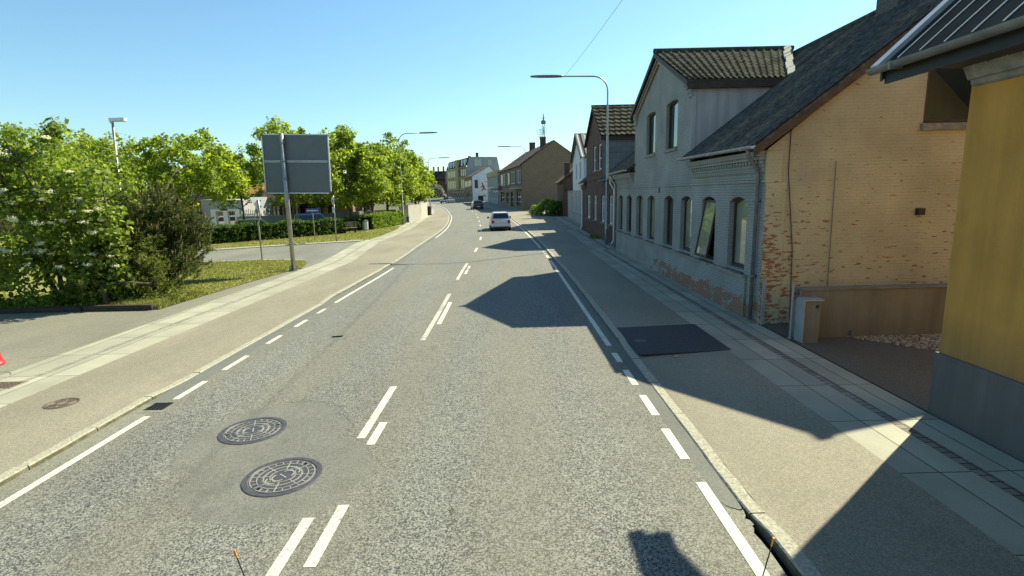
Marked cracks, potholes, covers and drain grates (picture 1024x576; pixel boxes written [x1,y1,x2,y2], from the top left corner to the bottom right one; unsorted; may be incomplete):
crack [721,502,792,576]
manhole cover [241,457,323,497]
manhole cover [43,398,80,409]
drain grate [137,402,177,413]
manhole cover [217,417,287,445]
